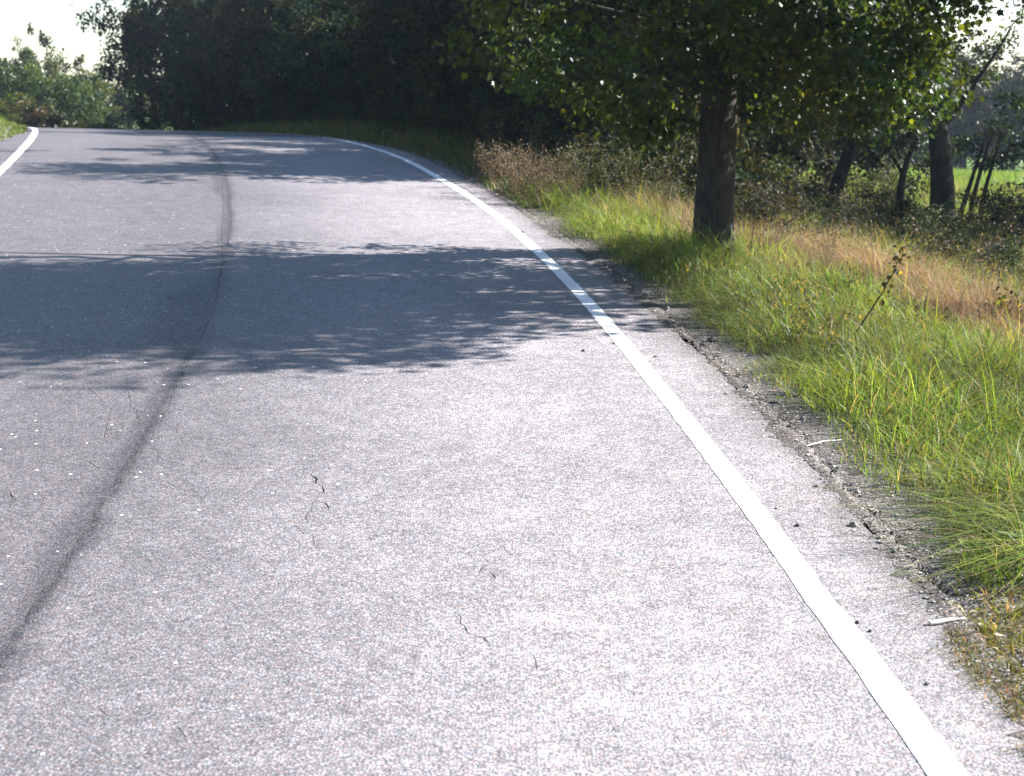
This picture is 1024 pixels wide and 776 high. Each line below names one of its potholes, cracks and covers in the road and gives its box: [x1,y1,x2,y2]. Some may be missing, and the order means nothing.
crack [296,469,329,545]
crack [0,144,223,648]
